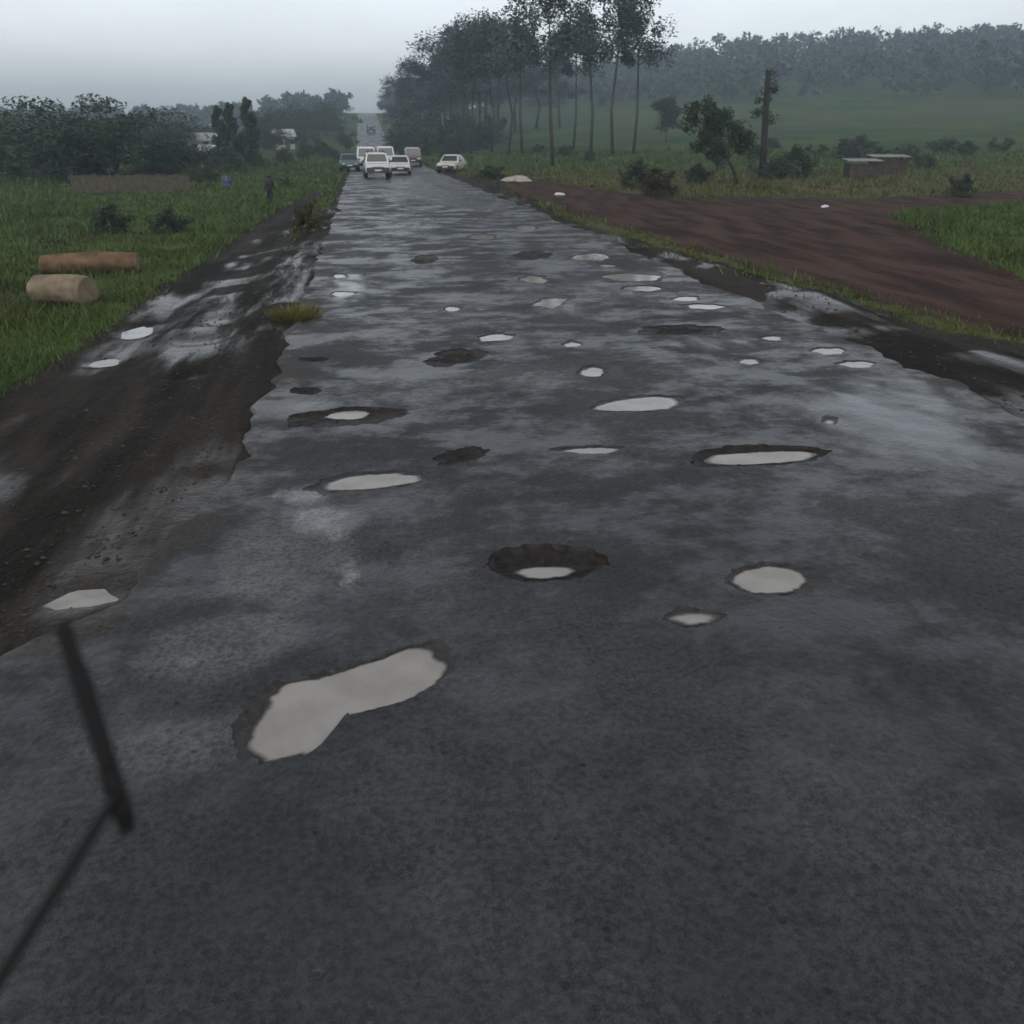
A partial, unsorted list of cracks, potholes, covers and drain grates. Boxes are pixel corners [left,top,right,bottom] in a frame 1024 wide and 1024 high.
pothole [549,444,625,454]
pothole [287,406,409,428]
pothole [477,332,517,341]
pothole [662,605,727,630]
pothole [422,348,490,367]
pothole [486,542,611,583]
pothole [302,469,430,496]
pothole [724,561,835,597]
pothole [575,364,608,380]
pothole [432,446,490,466]
pothole [588,394,691,415]
pothole [230,638,457,764]
